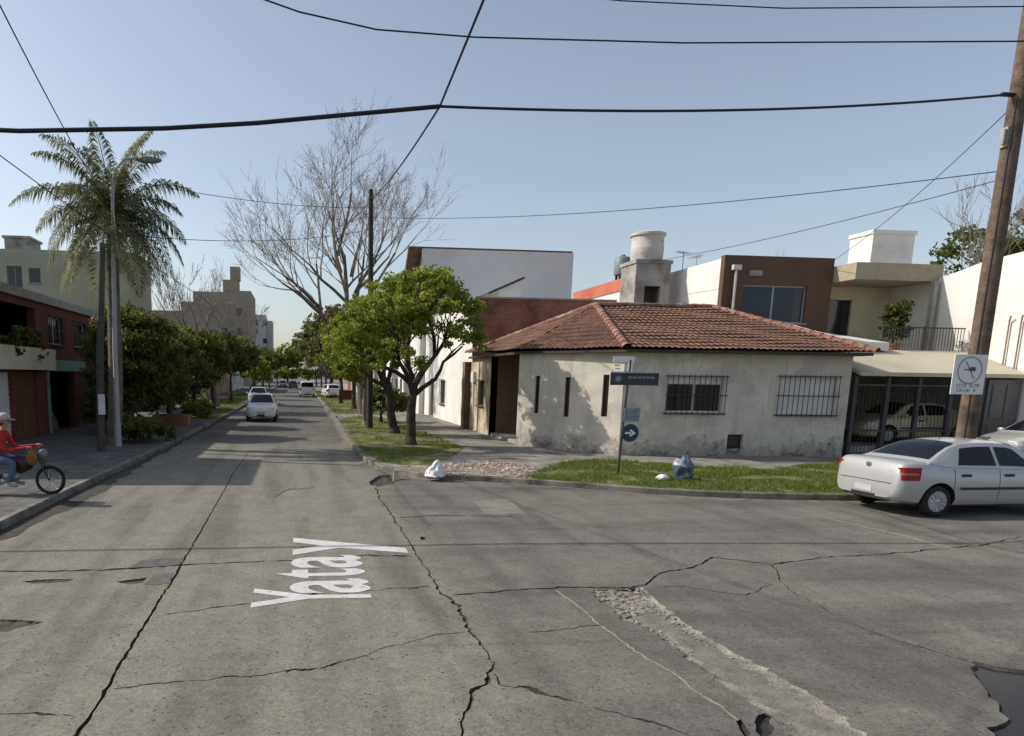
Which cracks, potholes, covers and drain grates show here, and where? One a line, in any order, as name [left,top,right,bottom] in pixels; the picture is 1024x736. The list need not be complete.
pothole [370,475,401,487]
pothole [0,619,43,632]
pothole [592,587,867,736]
crack [0,452,1021,736]
pothole [971,661,1024,736]
